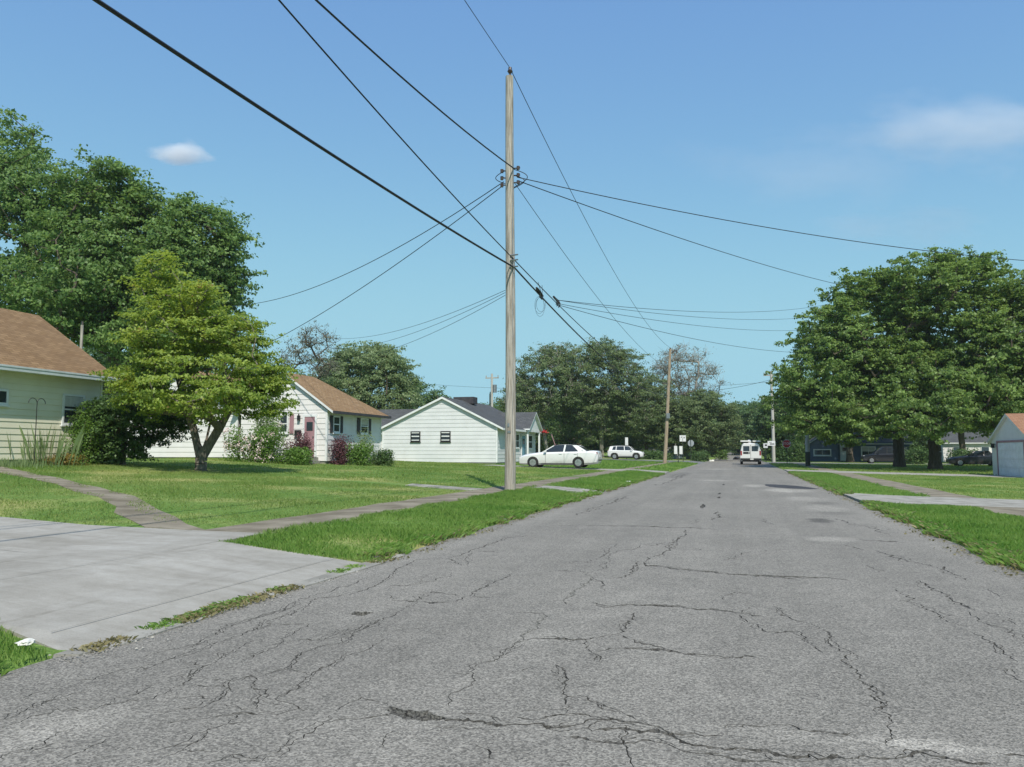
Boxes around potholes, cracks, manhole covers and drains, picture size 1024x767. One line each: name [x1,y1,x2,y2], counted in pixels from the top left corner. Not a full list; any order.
crack [329,495,1024,767]
crack [0,535,535,764]
pothole [386,706,448,722]
